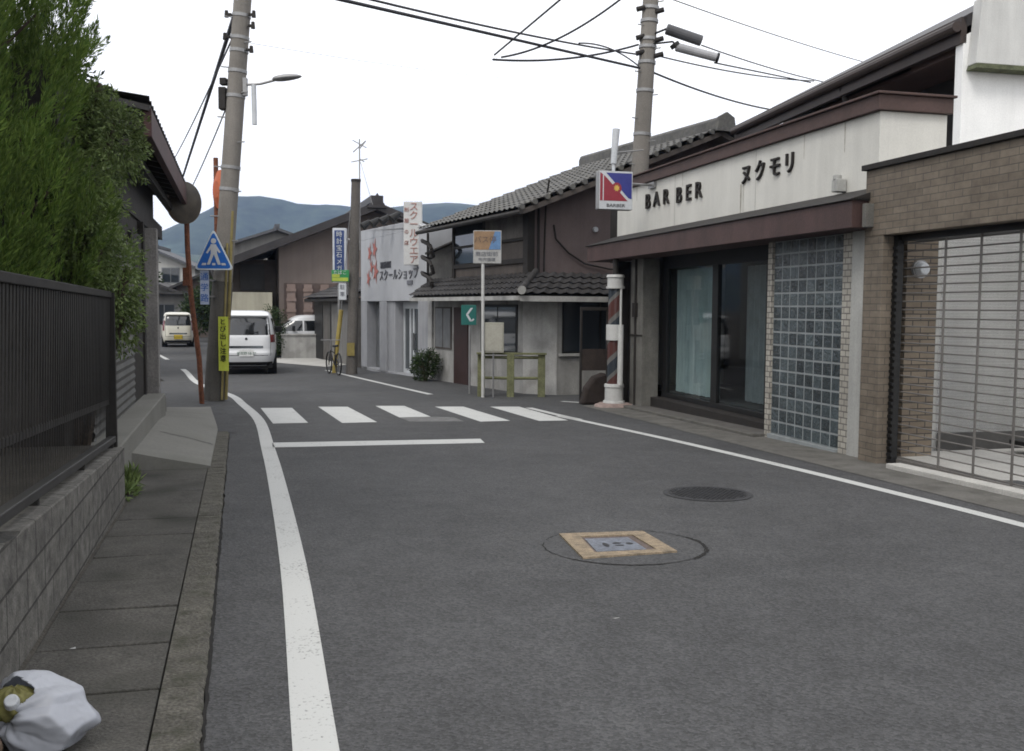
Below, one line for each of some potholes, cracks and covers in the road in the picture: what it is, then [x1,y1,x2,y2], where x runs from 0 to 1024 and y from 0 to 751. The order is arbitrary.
utility cover [559,531,677,559]
manhole cover [663,486,753,501]
